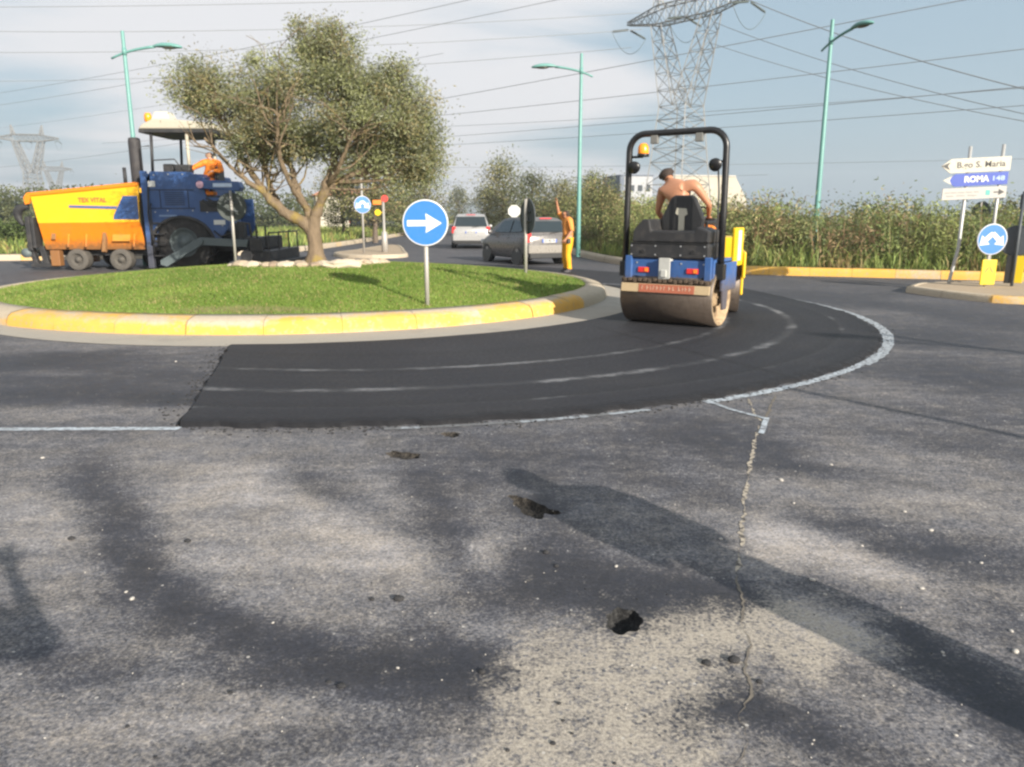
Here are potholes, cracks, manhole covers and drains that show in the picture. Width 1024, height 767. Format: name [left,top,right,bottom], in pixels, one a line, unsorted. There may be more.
pothole [606,607,643,635]
crack [734,395,777,767]
pothole [508,495,561,519]
pothole [385,451,421,460]
